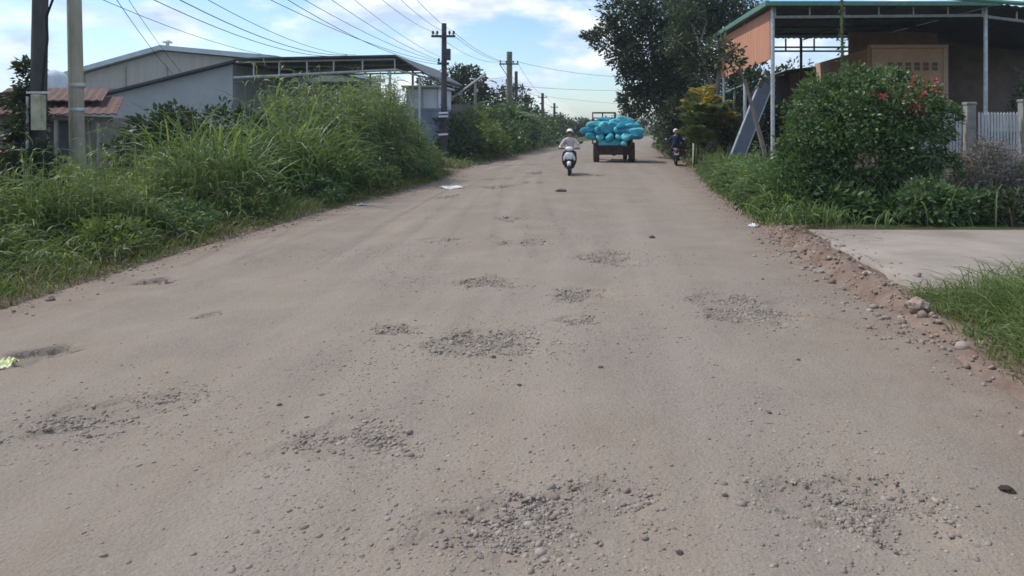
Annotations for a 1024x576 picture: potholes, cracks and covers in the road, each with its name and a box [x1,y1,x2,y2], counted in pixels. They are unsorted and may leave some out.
pothole [545,286,616,306]
pothole [0,345,87,371]
pothole [238,406,448,479]
pothole [354,466,707,576]
pothole [369,323,432,336]
pothole [0,384,235,449]
pothole [566,249,648,269]
pothole [720,467,992,565]
pothole [441,273,536,290]
pothole [391,324,565,361]
pothole [663,287,833,333]
pothole [550,313,603,326]
